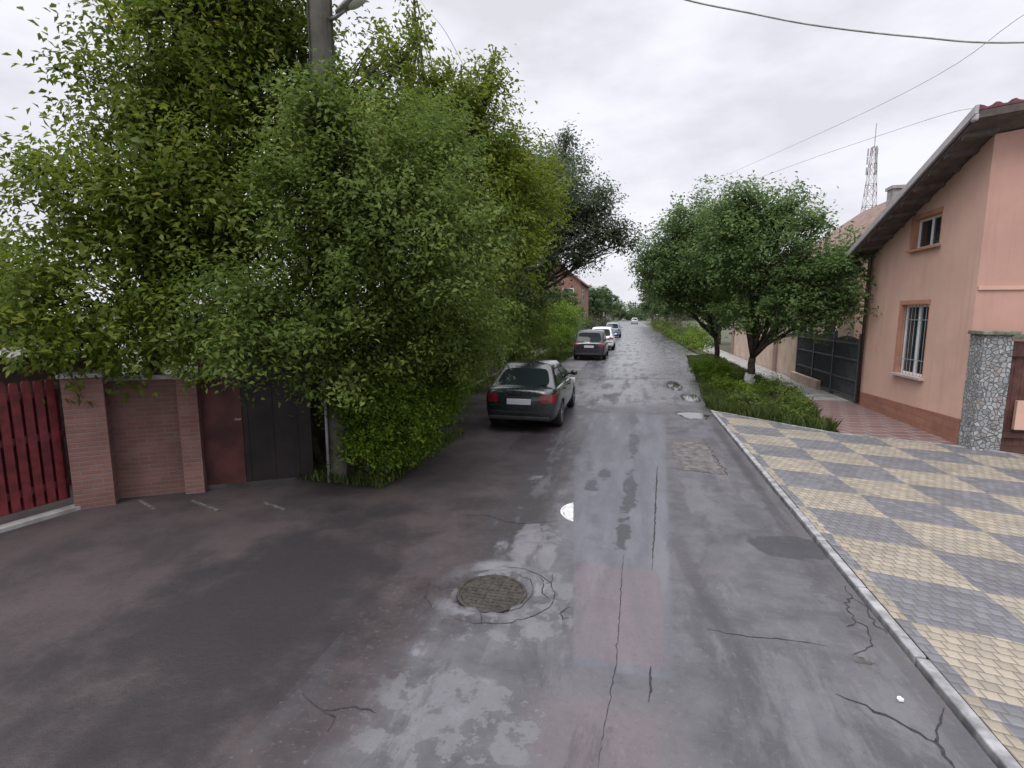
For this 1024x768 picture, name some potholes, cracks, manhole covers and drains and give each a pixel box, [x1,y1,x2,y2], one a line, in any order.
crack [598,556,624,765]
crack [706,628,826,646]
crack [648,466,658,702]
crack [837,694,955,768]
manhole cover [457,574,527,613]
crack [844,586,887,654]
crack [424,566,568,624]
crack [302,693,375,732]
